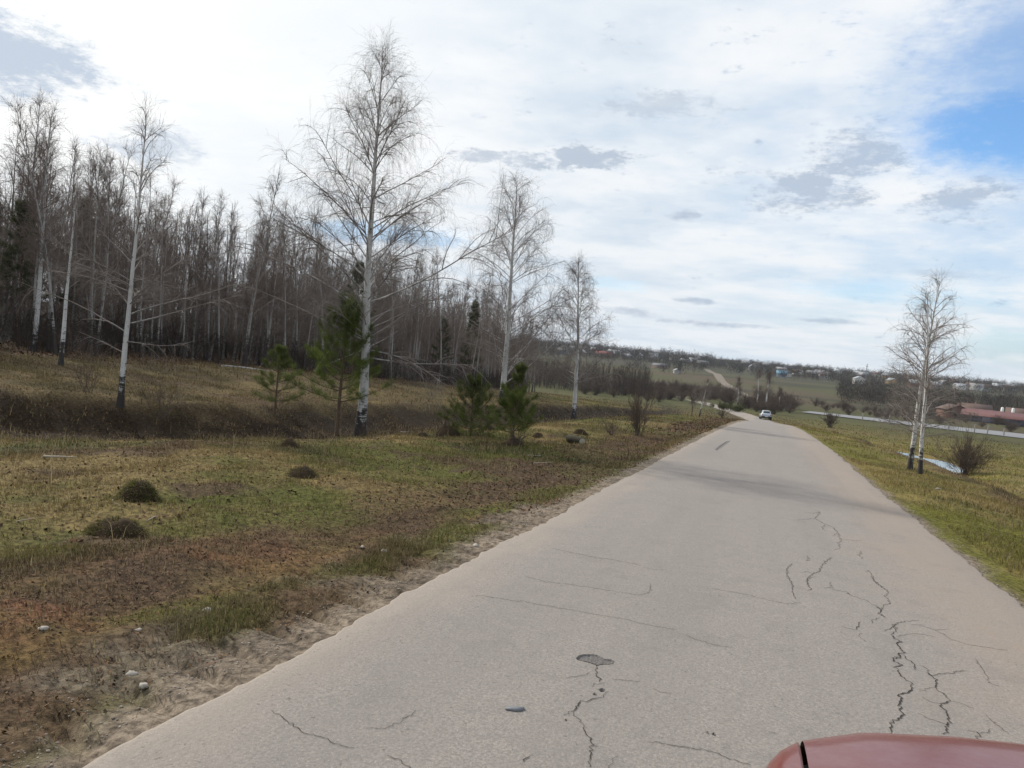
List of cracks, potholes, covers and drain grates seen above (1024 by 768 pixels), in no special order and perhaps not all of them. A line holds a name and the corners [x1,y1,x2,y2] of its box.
crack [568,665,638,767]
crack [479,595,727,647]
crack [839,570,1007,739]
pothole [577,654,614,666]
crack [711,512,862,604]
